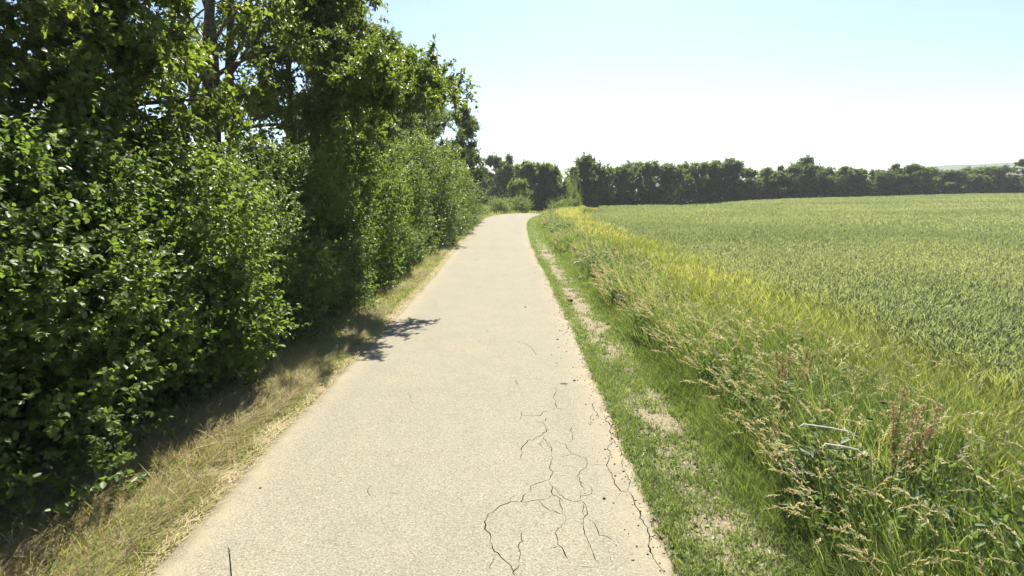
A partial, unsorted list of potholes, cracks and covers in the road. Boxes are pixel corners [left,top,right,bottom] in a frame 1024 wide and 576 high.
crack [484,394,664,576]
